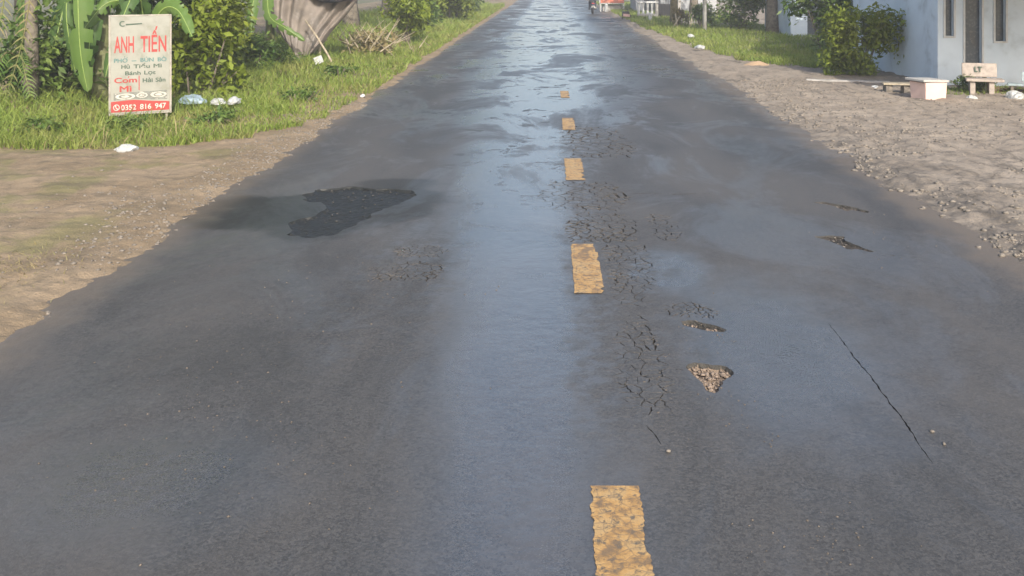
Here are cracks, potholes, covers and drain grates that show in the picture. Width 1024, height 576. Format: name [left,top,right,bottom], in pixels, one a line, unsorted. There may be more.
pothole [681,320,726,332]
crack [550,184,652,304]
pothole [815,235,874,252]
pothole [686,362,734,393]
crack [623,323,682,444]
pothole [815,202,869,213]
